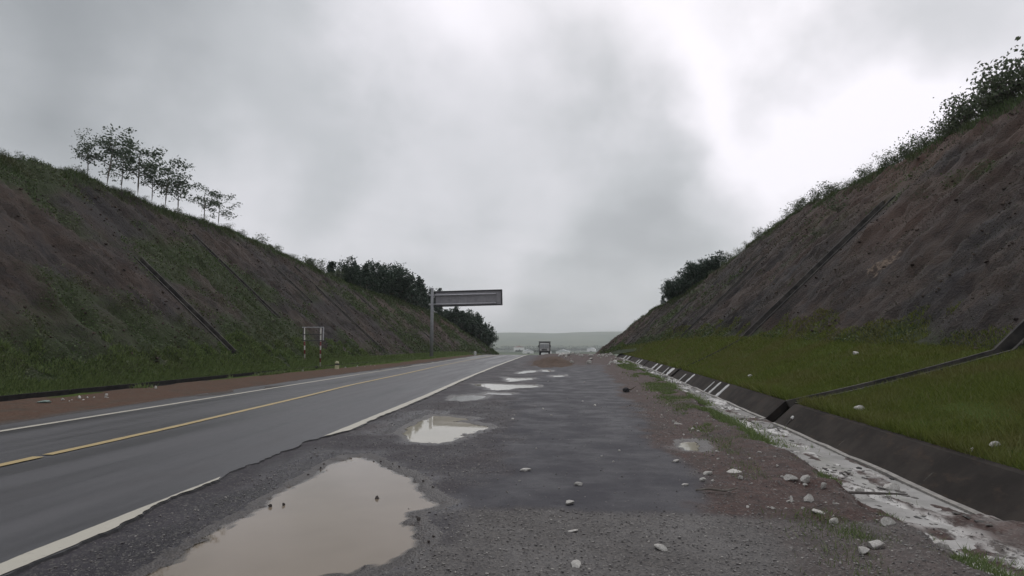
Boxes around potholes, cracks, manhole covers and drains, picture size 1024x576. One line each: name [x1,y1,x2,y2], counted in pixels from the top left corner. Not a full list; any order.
pothole [126,453,461,576]
pothole [446,394,491,402]
pothole [393,414,499,445]
pothole [673,438,713,452]
